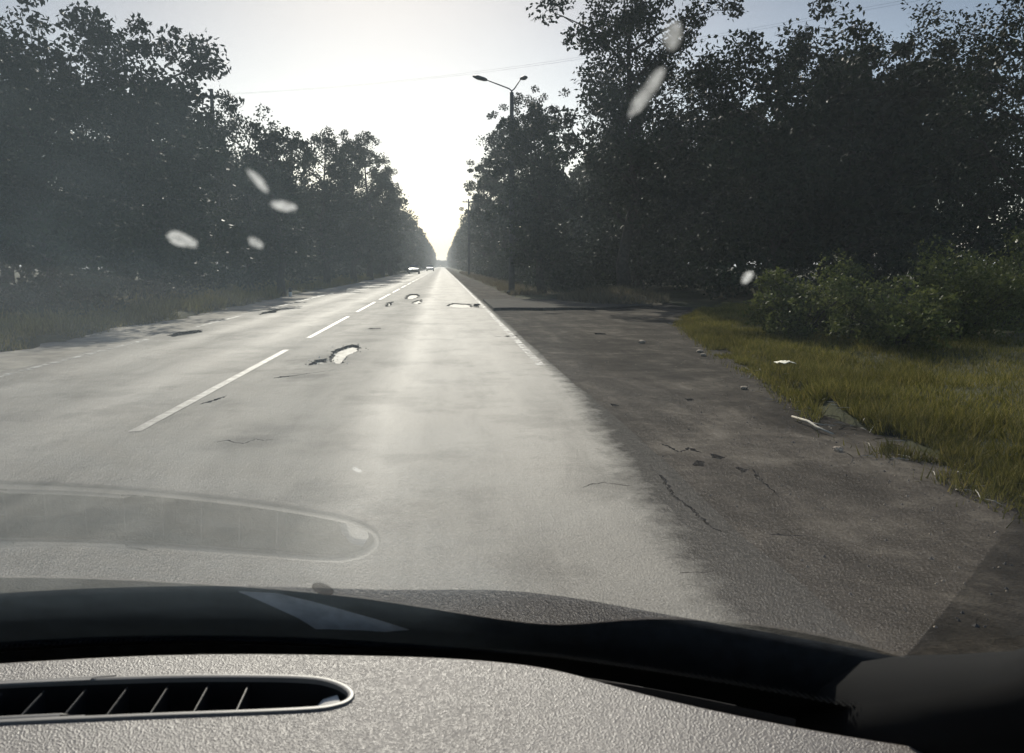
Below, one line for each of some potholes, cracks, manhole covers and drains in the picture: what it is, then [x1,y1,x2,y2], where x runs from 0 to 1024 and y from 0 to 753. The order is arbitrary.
crack [751,468,778,496]
crack [662,444,699,452]
crack [659,474,727,533]
pothole [298,344,369,366]
